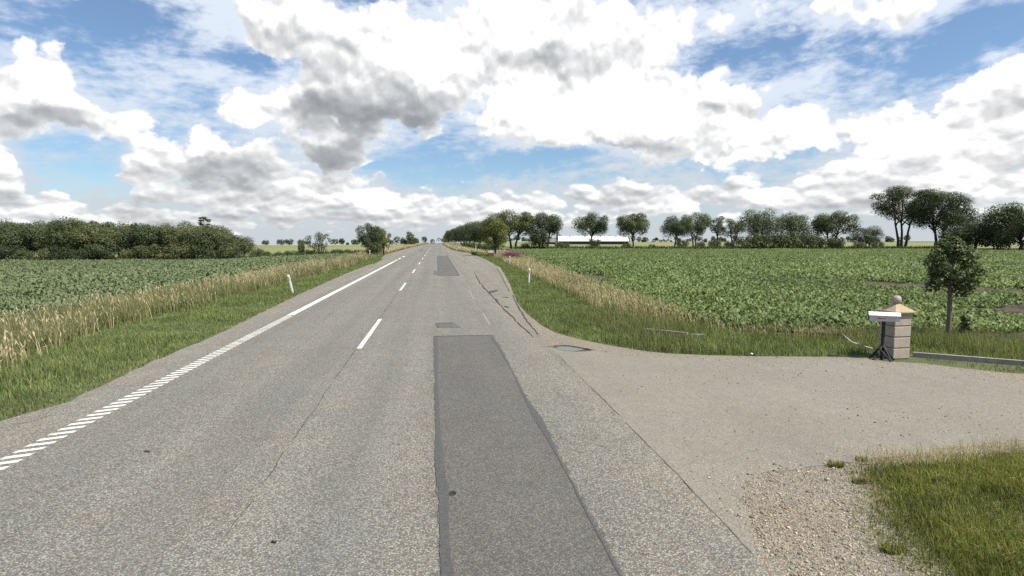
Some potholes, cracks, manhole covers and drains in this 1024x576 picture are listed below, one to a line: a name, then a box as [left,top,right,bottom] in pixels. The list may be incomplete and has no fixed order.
crack [474,269,550,347]
